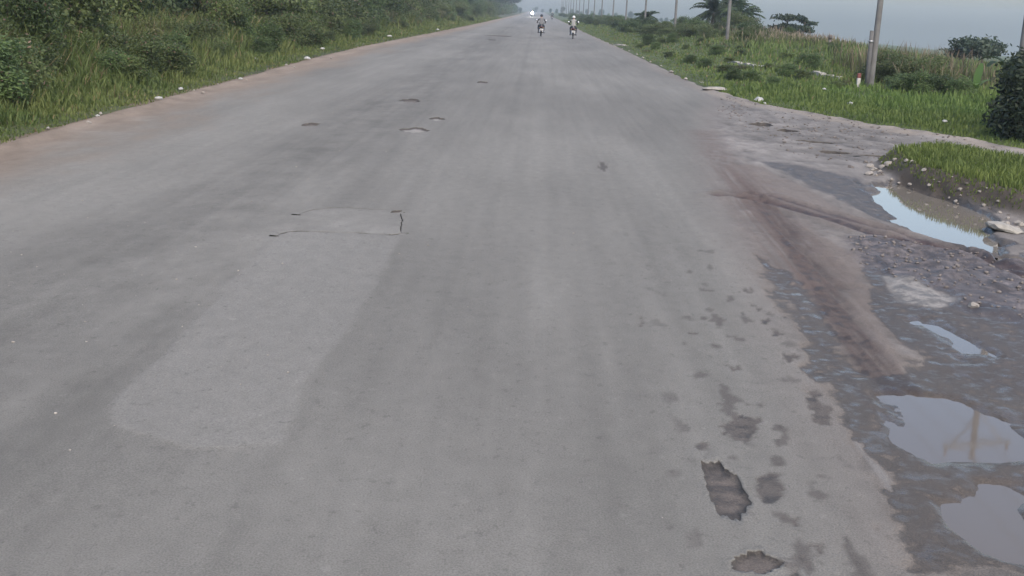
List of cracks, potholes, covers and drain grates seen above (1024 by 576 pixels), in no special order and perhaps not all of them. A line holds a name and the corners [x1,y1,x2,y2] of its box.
crack [266,206,414,238]
pothole [390,126,438,135]
pothole [688,447,766,541]
pothole [716,545,799,576]
